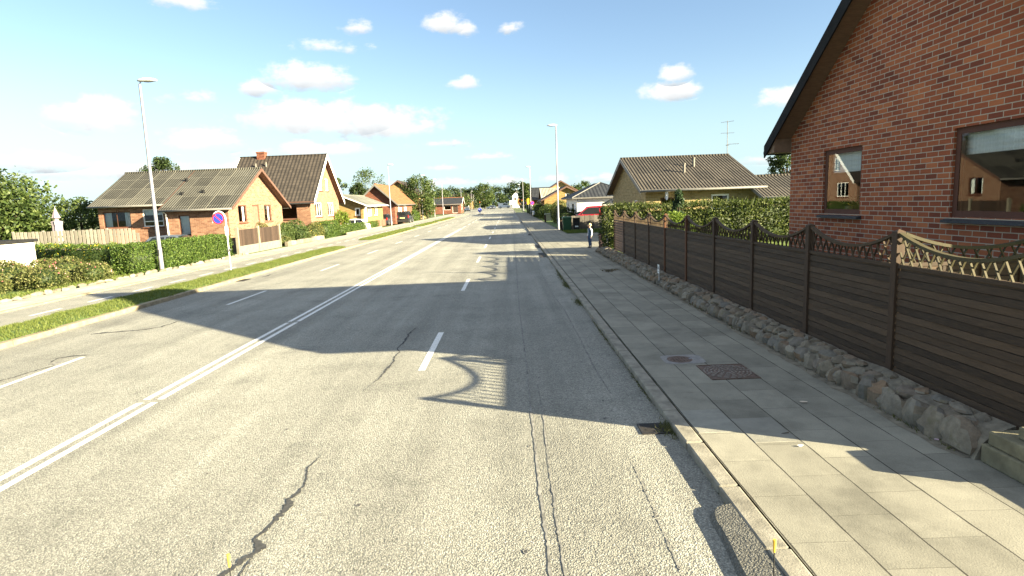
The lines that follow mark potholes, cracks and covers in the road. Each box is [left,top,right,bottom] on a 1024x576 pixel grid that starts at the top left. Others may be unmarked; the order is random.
drain grate [637,422,670,435]
manhole cover [660,355,706,364]
manhole cover [696,363,761,380]
crack [634,465,683,575]
crack [95,320,182,334]
crack [362,330,413,392]
crack [0,355,81,381]
crack [219,457,319,576]
